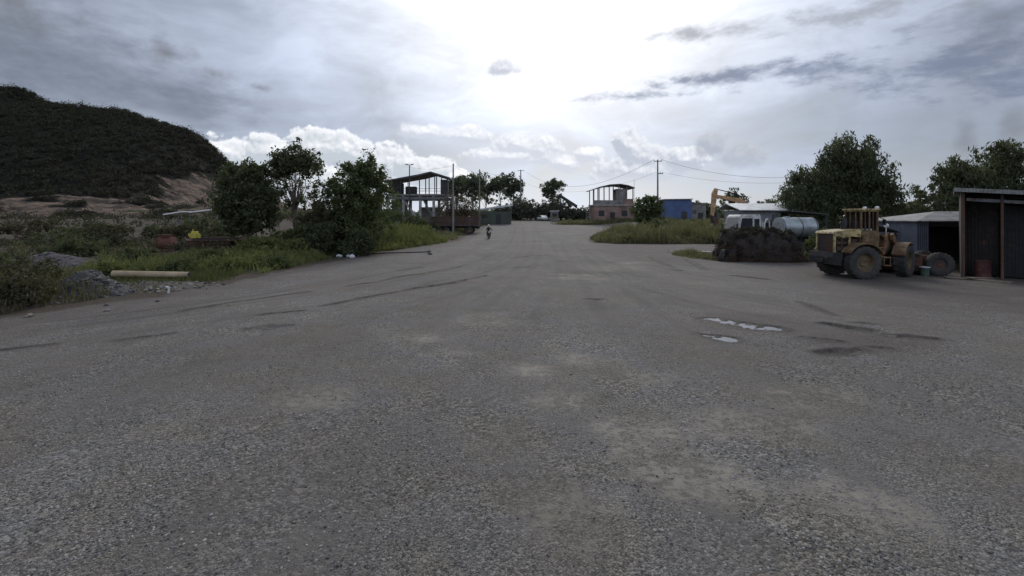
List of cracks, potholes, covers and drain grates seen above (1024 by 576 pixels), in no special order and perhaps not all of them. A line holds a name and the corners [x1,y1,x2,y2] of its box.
pothole [690,315,804,333]
pothole [686,331,749,345]
